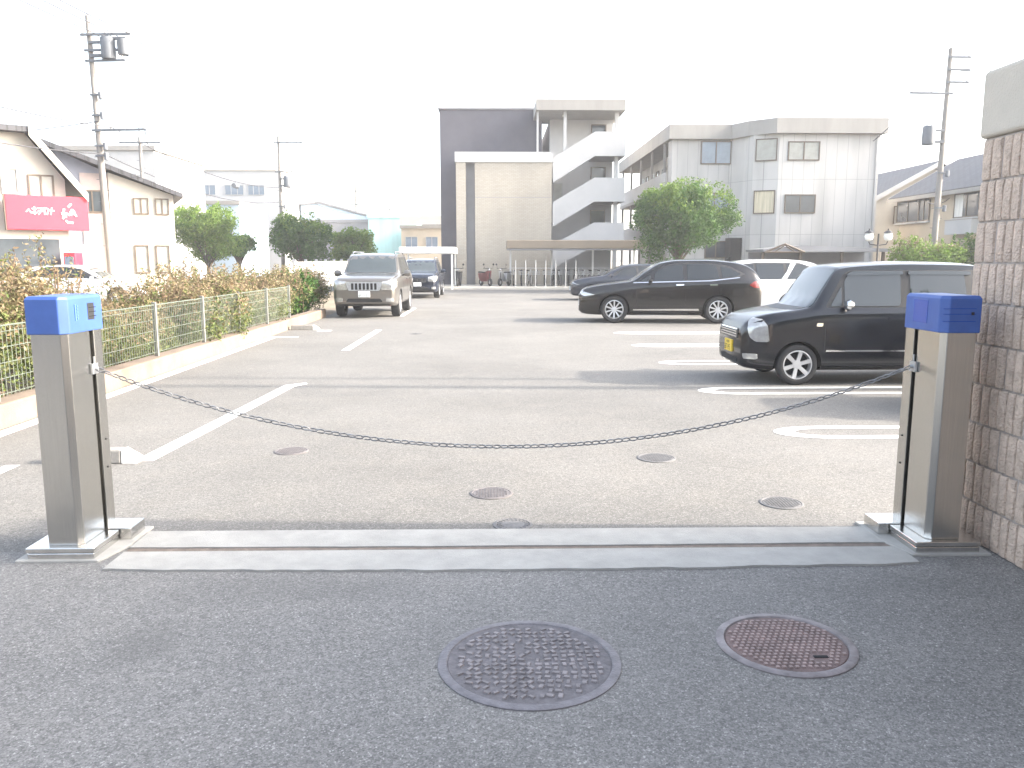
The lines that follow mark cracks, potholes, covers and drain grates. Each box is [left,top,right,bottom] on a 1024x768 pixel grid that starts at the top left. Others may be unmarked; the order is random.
manhole cover [470,487,513,500]
manhole cover [637,453,676,463]
manhole cover [715,614,859,679]
manhole cover [759,496,804,510]
manhole cover [438,621,621,712]
manhole cover [274,447,309,455]
manhole cover [493,518,533,529]
